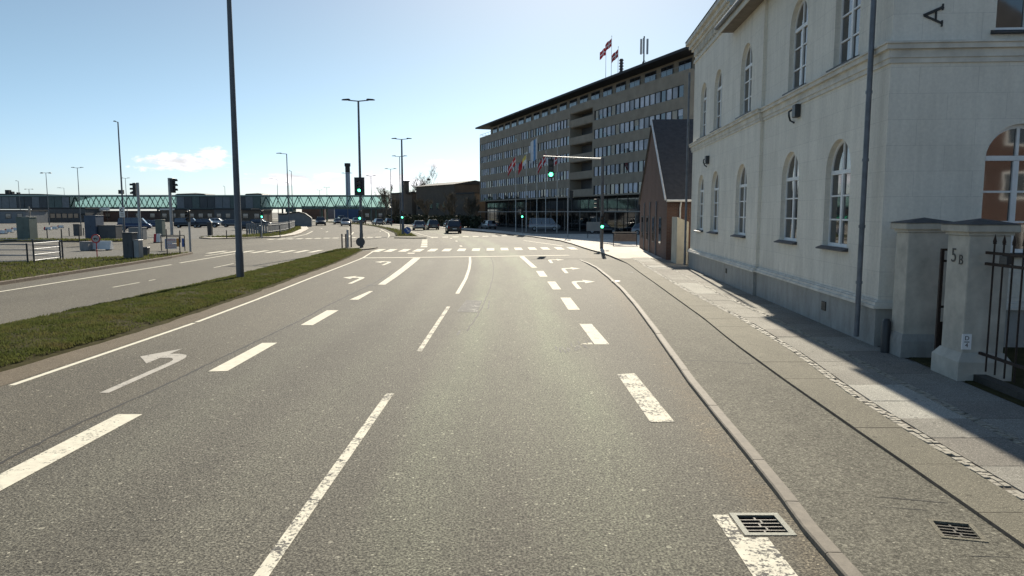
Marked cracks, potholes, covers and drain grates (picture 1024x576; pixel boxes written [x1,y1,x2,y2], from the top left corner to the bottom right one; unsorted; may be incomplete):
drain grate [926,518,989,543]
drain grate [729,513,797,536]
